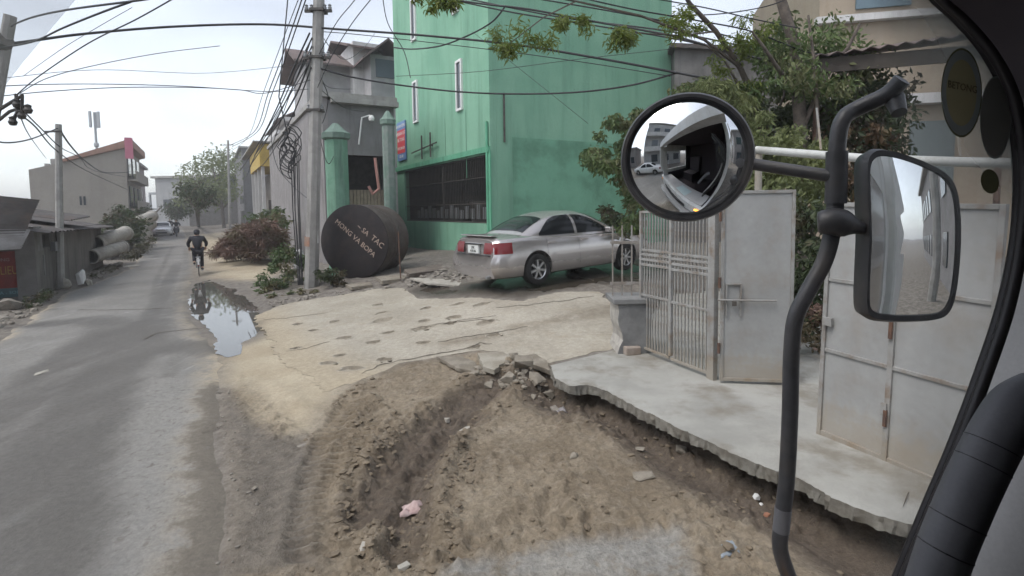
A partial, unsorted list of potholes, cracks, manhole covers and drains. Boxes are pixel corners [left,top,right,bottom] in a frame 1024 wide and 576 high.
crack [363,296,592,373]
